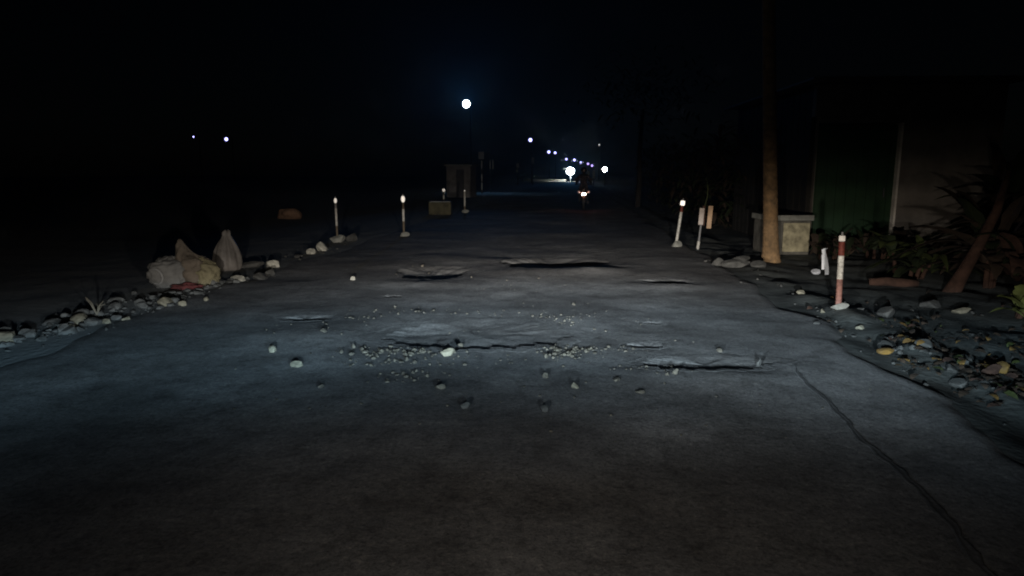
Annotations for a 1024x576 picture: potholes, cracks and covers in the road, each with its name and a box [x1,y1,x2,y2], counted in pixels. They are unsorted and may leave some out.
pothole [389,265,479,281]
pothole [488,257,624,269]
pothole [635,276,697,285]
pothole [618,340,672,350]
pothole [625,354,798,372]
pothole [361,317,594,353]
